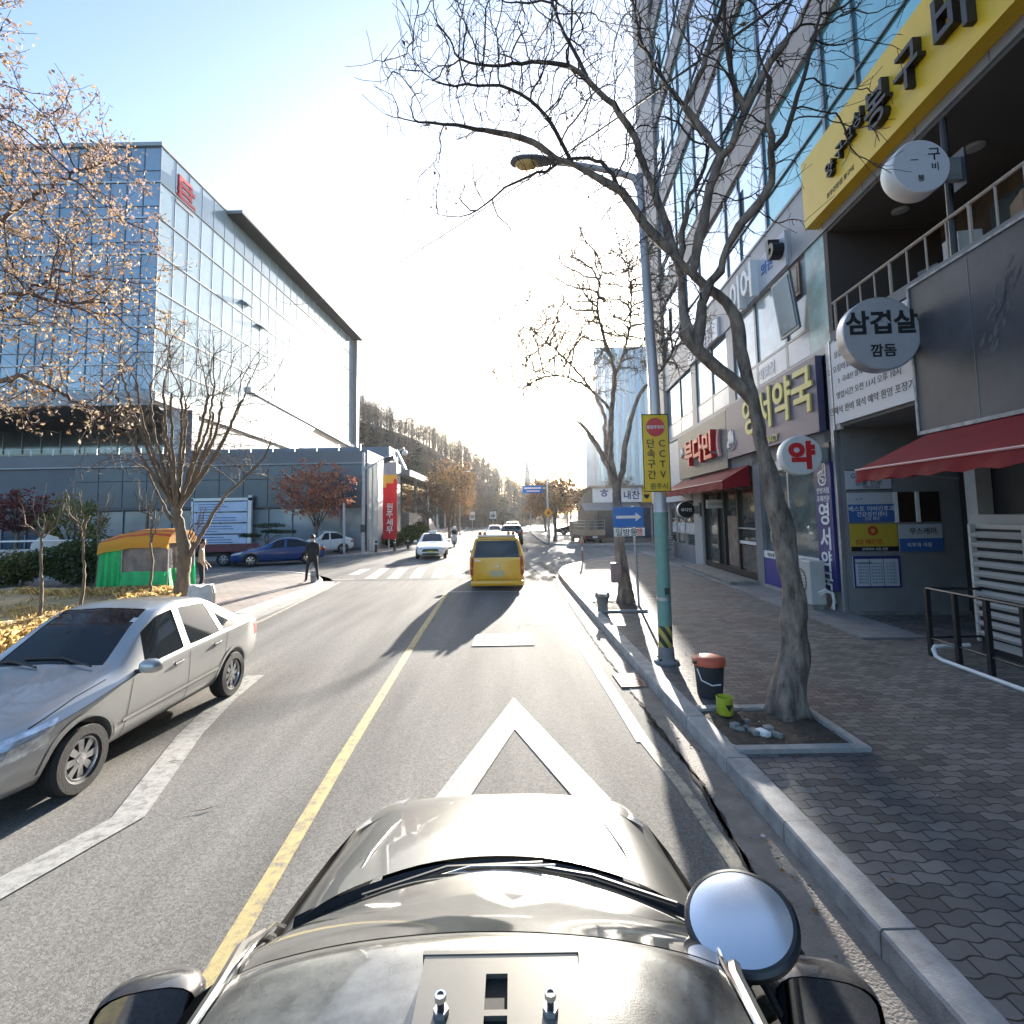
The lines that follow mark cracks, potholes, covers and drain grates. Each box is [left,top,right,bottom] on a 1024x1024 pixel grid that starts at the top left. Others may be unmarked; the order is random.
crack [556,585,805,955]
